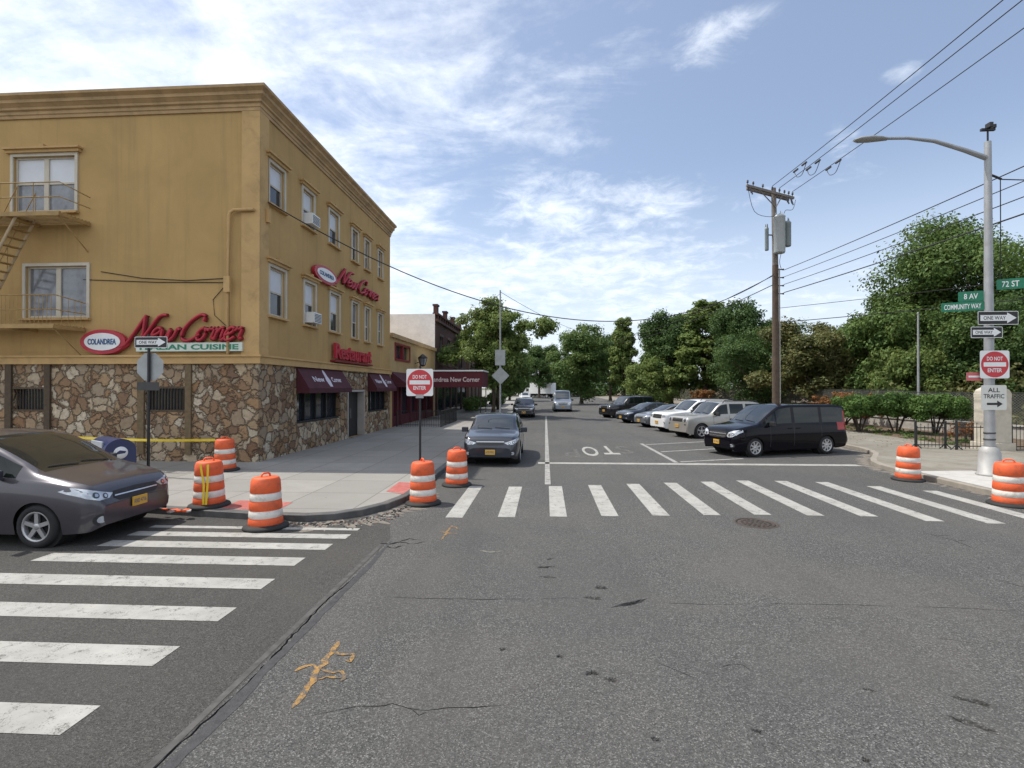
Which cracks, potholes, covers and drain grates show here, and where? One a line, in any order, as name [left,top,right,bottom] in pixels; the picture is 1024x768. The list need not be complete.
manhole cover [734,518,780,529]
crack [315,703,509,715]
crack [382,538,422,548]
